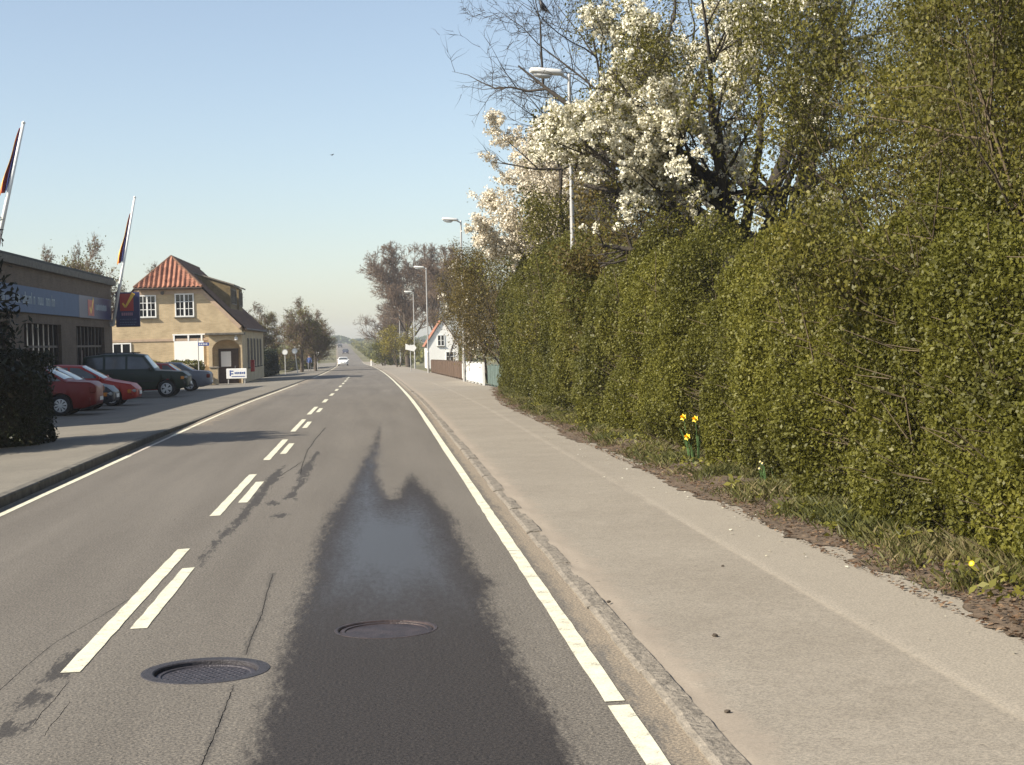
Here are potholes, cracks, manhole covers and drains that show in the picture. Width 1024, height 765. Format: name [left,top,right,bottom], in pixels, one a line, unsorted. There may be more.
crack [0,599,129,690]
manhole cover [334,619,438,639]
crack [33,682,70,735]
manhole cover [140,657,271,685]
